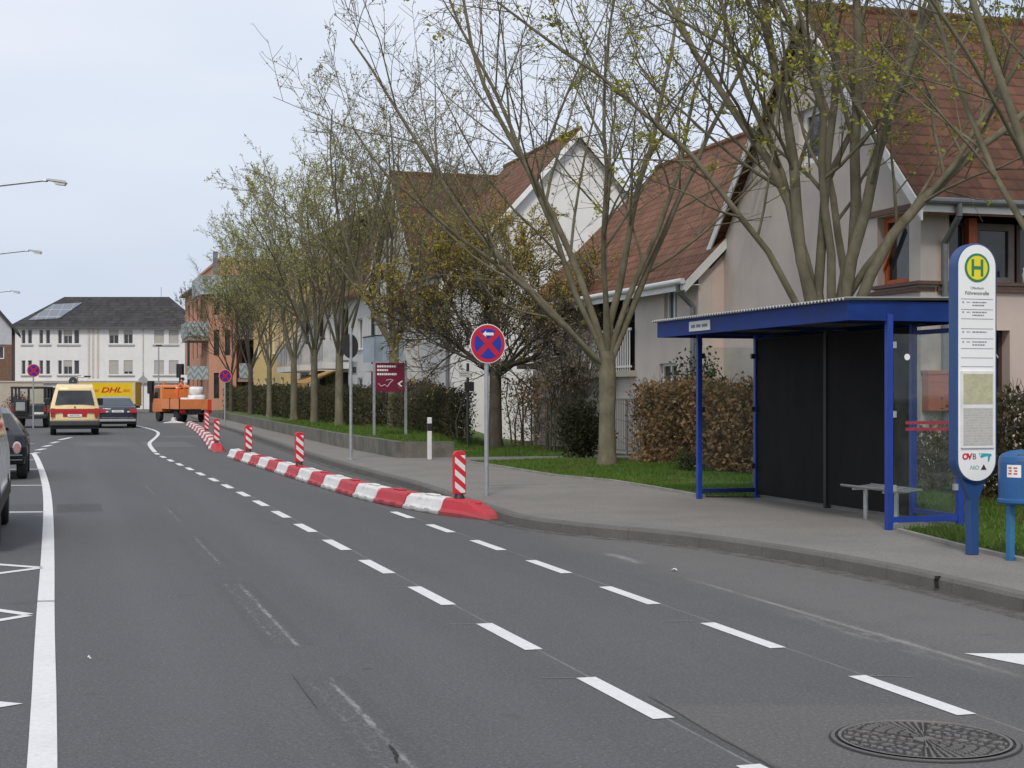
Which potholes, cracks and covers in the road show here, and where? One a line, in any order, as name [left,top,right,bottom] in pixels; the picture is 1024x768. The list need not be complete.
manhole cover [828,719,1023,763]
